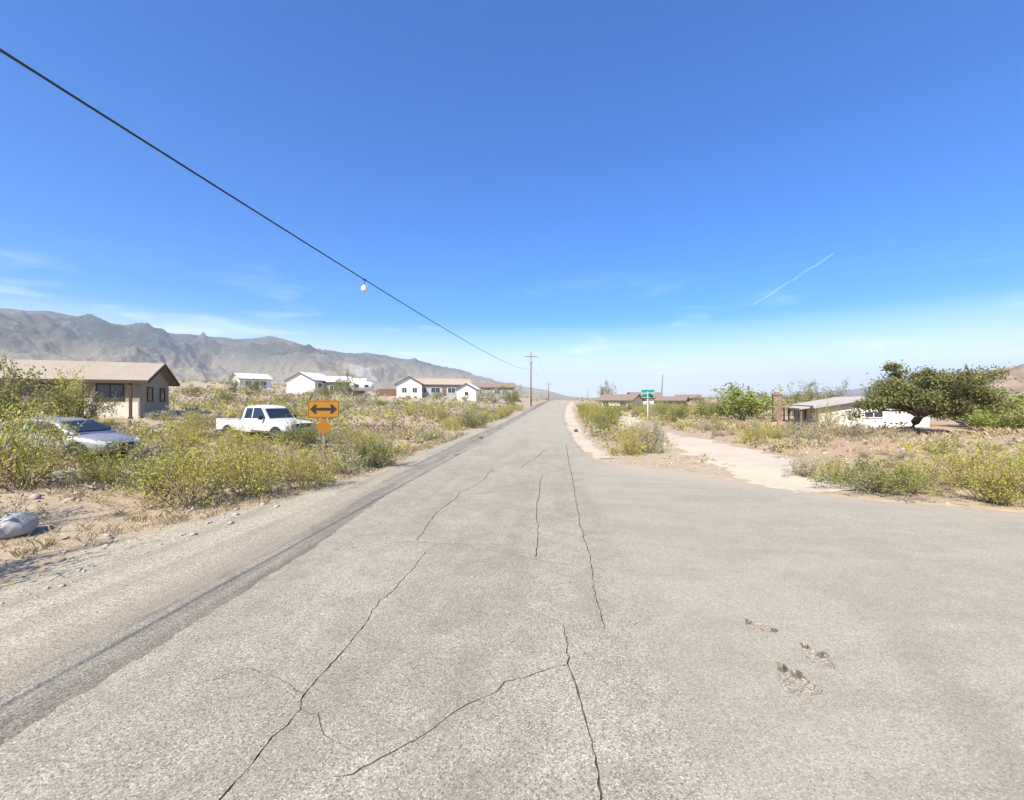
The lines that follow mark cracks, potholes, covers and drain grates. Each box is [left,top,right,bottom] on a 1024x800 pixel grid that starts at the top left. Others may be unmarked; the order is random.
pothole [776,662,823,696]
crack [178,450,602,800]
pothole [799,642,835,669]
pothole [745,619,781,633]
